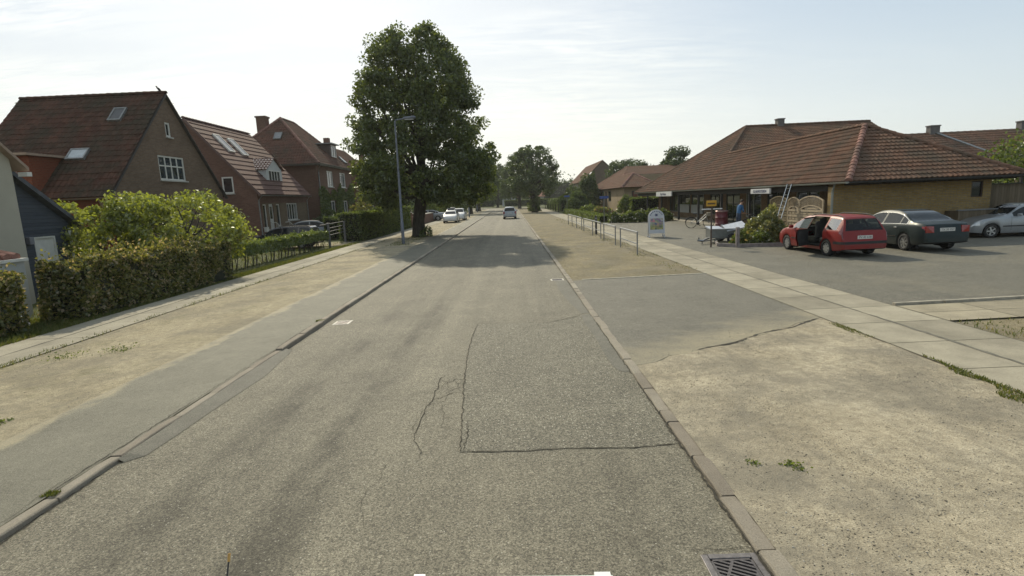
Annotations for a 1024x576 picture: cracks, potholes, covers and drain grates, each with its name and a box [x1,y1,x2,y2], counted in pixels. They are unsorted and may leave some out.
crack [412,324,676,465]
drain grate [700,553,771,576]
